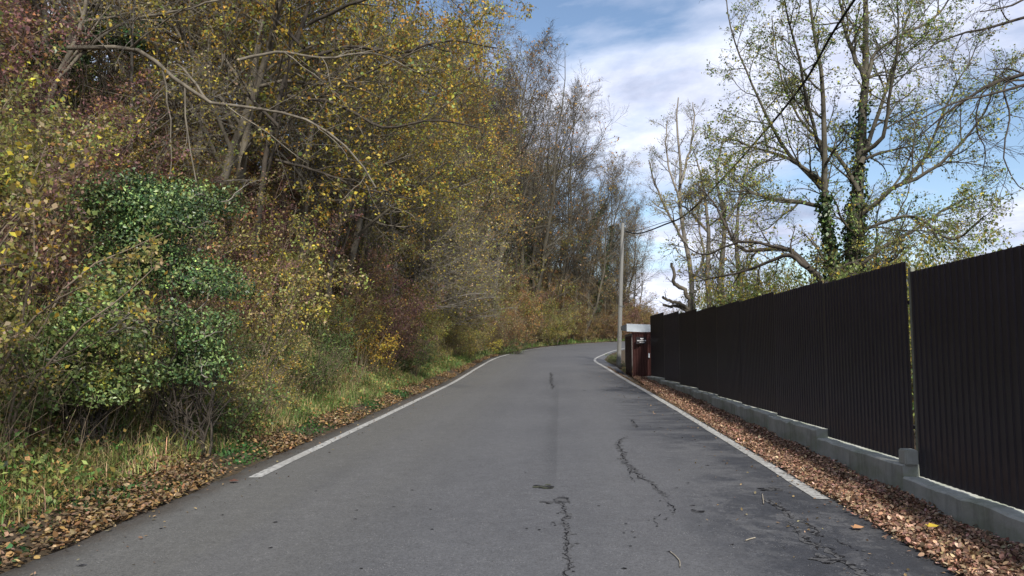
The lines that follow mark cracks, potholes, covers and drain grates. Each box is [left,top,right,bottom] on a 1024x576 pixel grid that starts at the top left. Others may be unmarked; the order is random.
crack [538,495,578,576]
crack [615,419,676,533]
crack [763,497,873,576]
